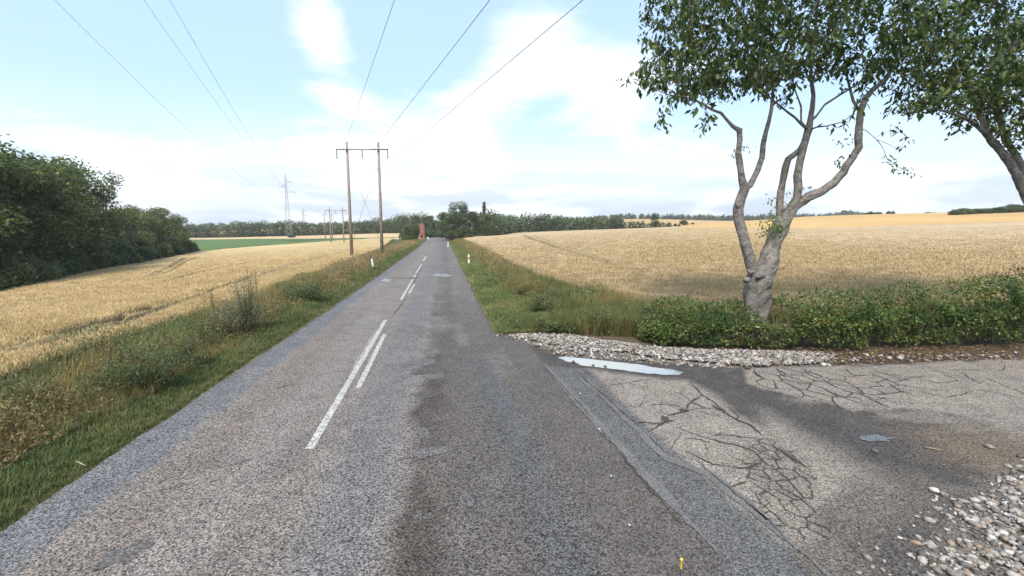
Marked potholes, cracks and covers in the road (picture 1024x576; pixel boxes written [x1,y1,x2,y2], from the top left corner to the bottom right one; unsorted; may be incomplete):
crack [539,363,1023,540]
